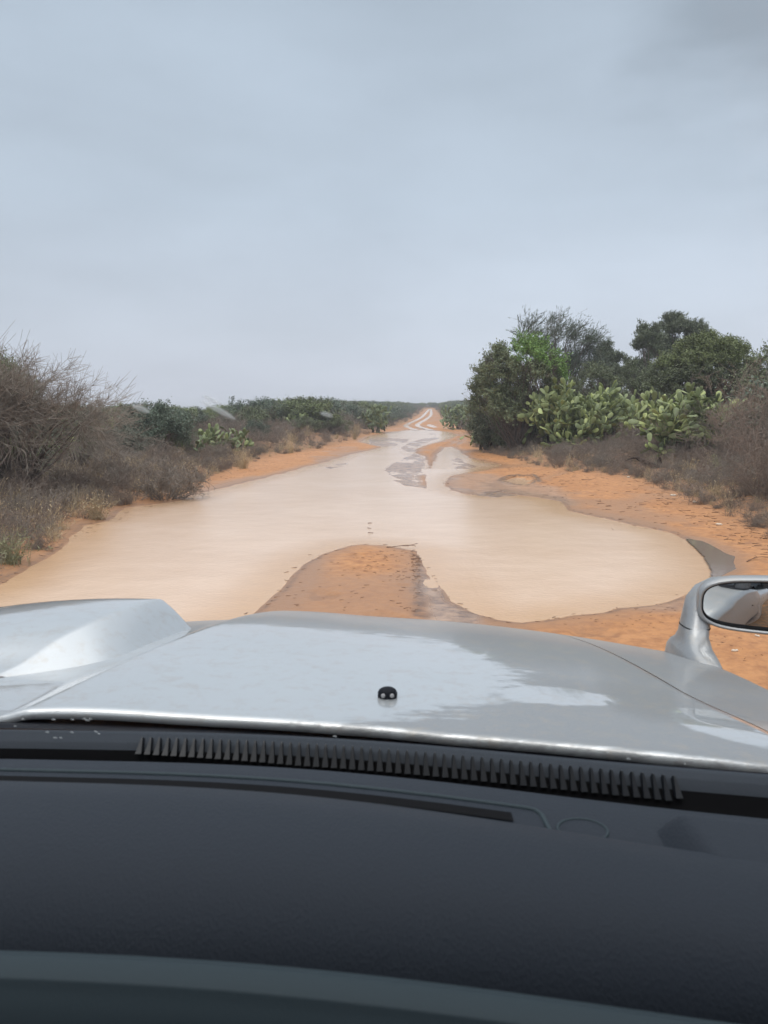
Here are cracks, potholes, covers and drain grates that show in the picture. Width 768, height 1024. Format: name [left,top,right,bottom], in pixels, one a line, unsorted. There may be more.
pothole [495,474,548,487]
